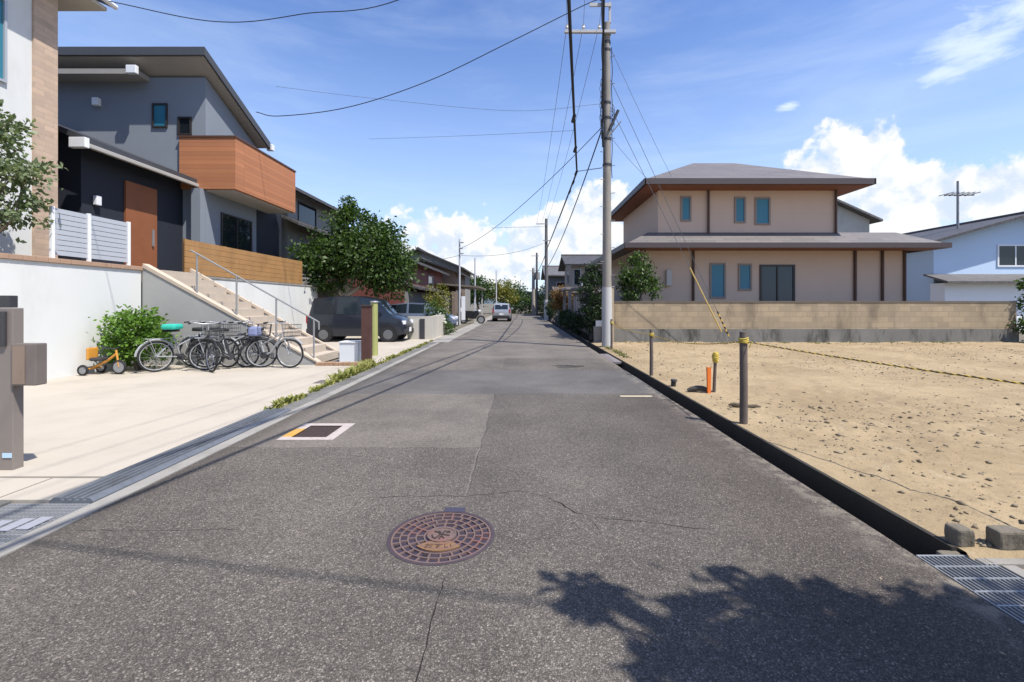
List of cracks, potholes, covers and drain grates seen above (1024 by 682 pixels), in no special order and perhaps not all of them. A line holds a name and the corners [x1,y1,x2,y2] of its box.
drain grate [916,555,1024,626]
manhole cover [276,423,355,440]
manhole cover [387,507,495,566]
crack [379,491,710,530]
drain grate [0,504,89,546]
crack [415,575,446,682]
